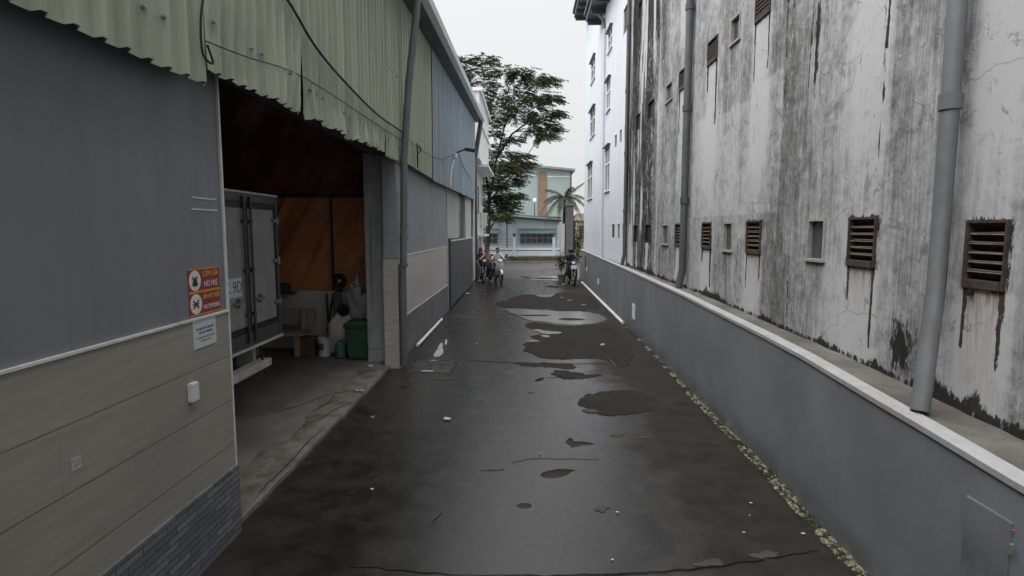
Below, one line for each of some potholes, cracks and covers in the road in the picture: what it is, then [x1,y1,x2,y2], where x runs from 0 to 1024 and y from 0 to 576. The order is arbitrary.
manhole cover [404,359,461,374]
crack [351,550,817,576]
crack [253,391,352,501]
